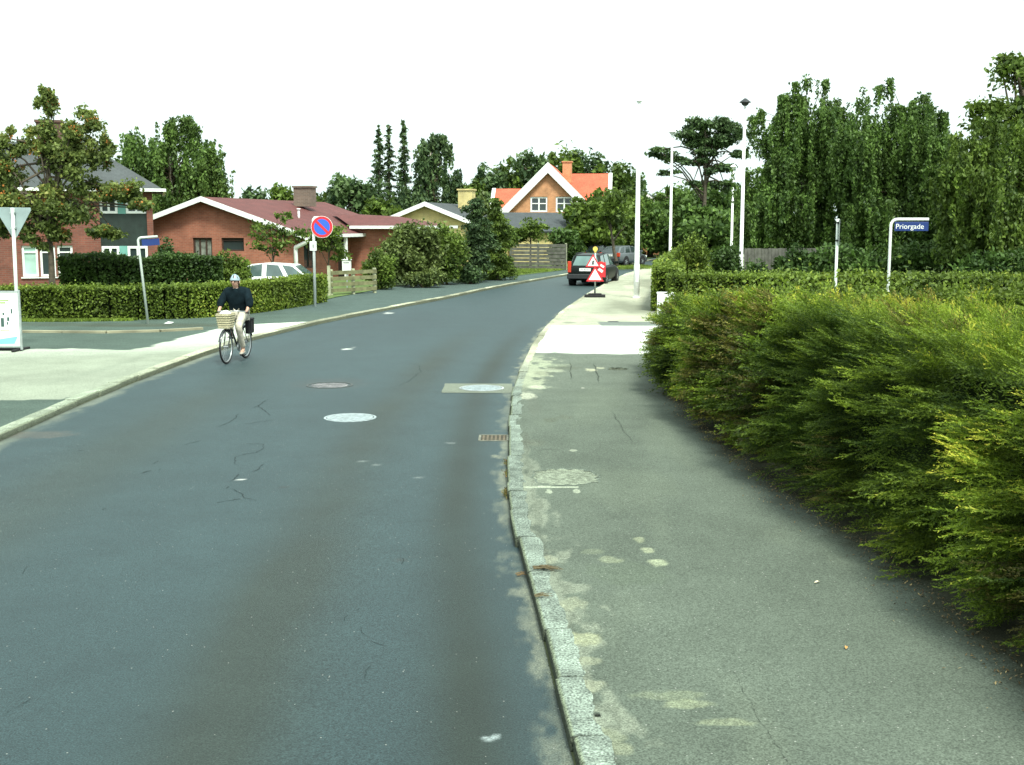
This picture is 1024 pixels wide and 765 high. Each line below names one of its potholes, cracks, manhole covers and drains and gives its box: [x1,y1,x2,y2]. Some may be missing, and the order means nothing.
manhole cover [324,413,376,422]
